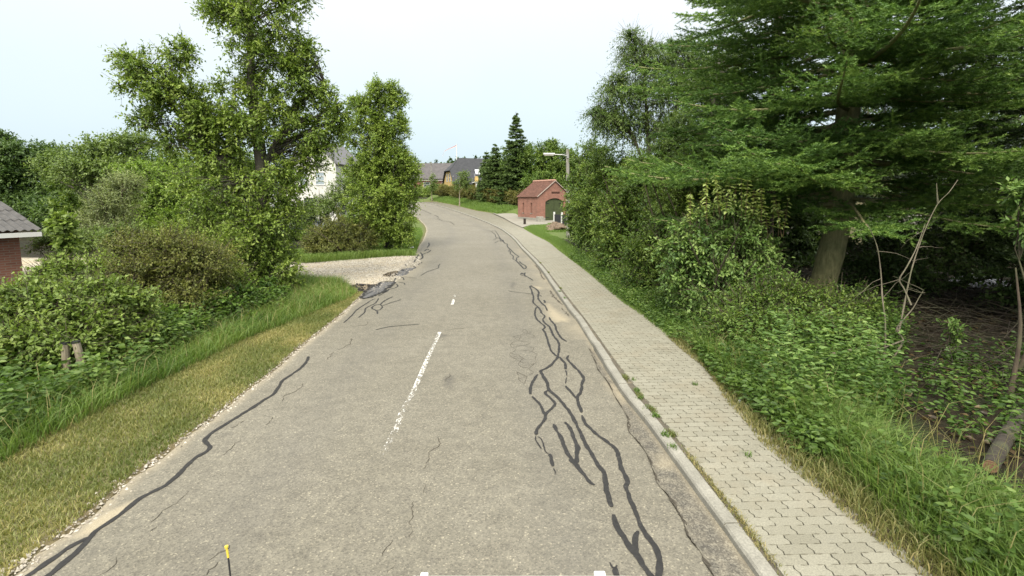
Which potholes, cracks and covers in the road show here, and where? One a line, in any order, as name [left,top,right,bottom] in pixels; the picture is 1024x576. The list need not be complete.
pothole [350,283,378,292]
crack [510,329,537,383]
